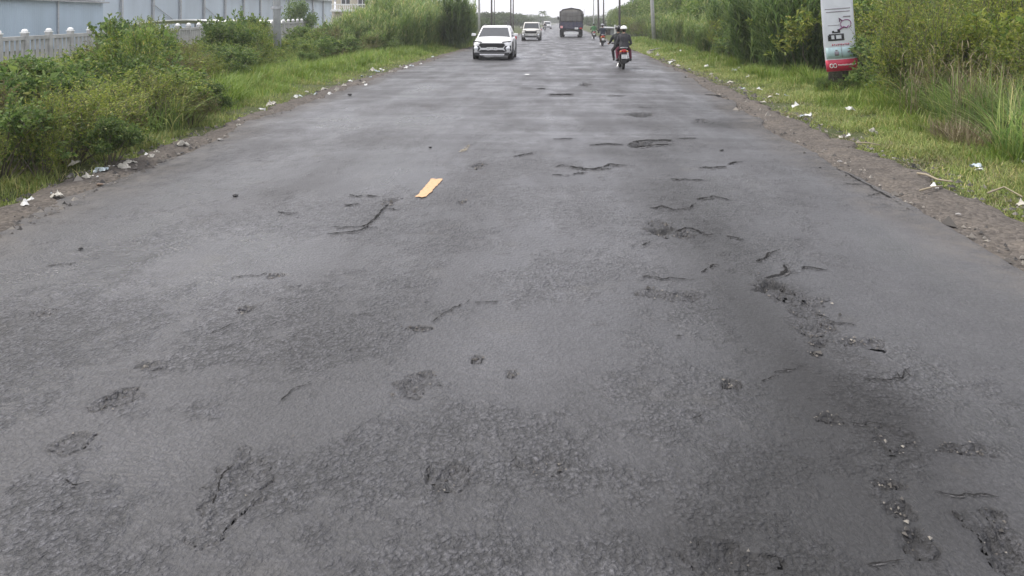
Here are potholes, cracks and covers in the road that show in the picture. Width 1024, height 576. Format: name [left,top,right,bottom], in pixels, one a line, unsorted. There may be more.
pothole [859,338,886,351]
pothole [748,276,804,303]
pothole [86,386,145,413]
pothole [46,432,97,457]
crack [675,227,743,240]
pothole [809,338,828,348]
pothole [815,319,839,334]
pothole [842,338,862,347]
pothole [816,412,844,425]
pothole [778,295,830,307]
pothole [799,323,824,338]
pothole [787,306,823,320]
